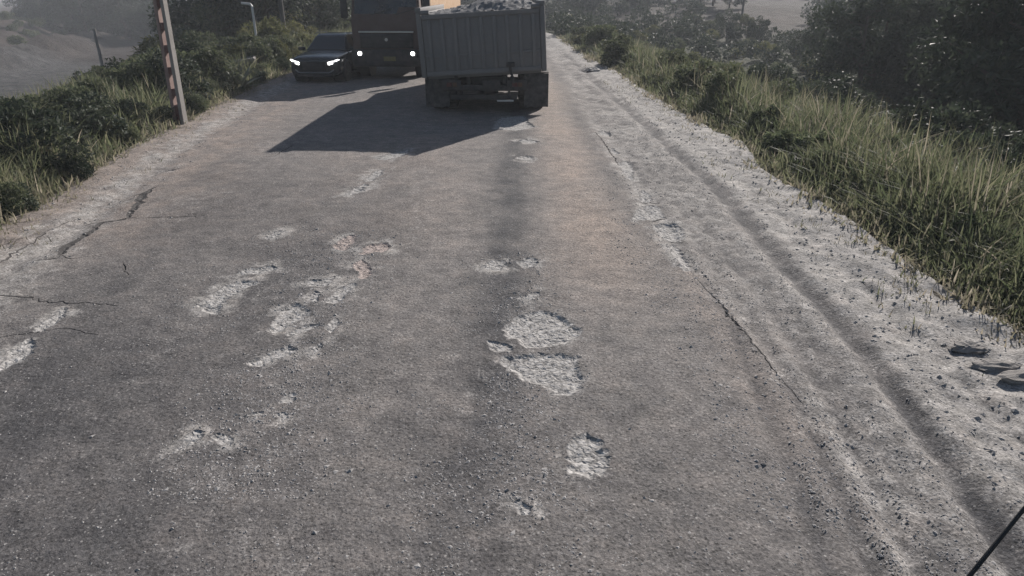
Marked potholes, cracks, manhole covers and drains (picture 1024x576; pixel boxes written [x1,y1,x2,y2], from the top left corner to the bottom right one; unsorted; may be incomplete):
pothole [210,432,234,447]
crack [0,295,118,306]
crack [0,168,195,277]
pothole [195,280,262,315]
pothole [351,259,375,280]
pothole [501,310,583,349]
pothole [33,306,69,333]
pothole [513,499,532,516]
pothole [486,340,513,352]
pothole [343,183,369,197]
pothole [332,234,358,251]
pothole [0,337,39,371]
